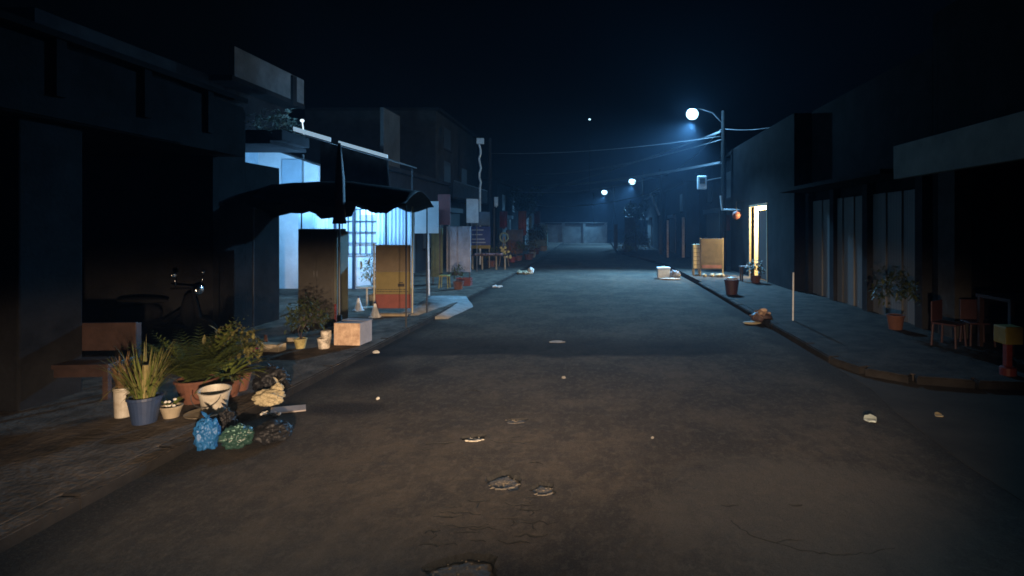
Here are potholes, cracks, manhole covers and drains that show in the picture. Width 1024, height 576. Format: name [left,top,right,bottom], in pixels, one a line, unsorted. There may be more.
pothole [421,552,498,576]
crack [722,504,894,556]
crack [418,496,558,547]
pothole [529,482,557,496]
pothole [485,470,522,491]
pothole [460,434,487,442]
